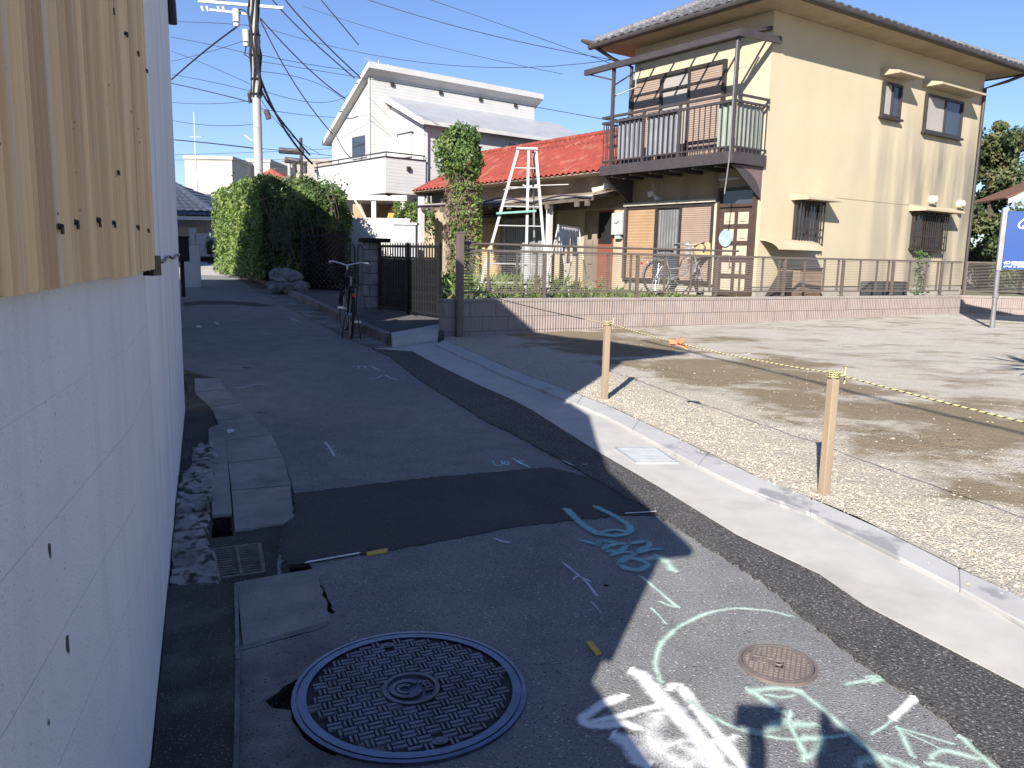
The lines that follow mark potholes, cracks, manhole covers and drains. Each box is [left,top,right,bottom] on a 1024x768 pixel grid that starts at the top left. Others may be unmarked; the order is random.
manhole cover [738,644,818,687]
manhole cover [291,631,527,767]
drain grate [213,542,266,579]
pothole [266,679,307,721]
drain grate [614,447,679,464]
